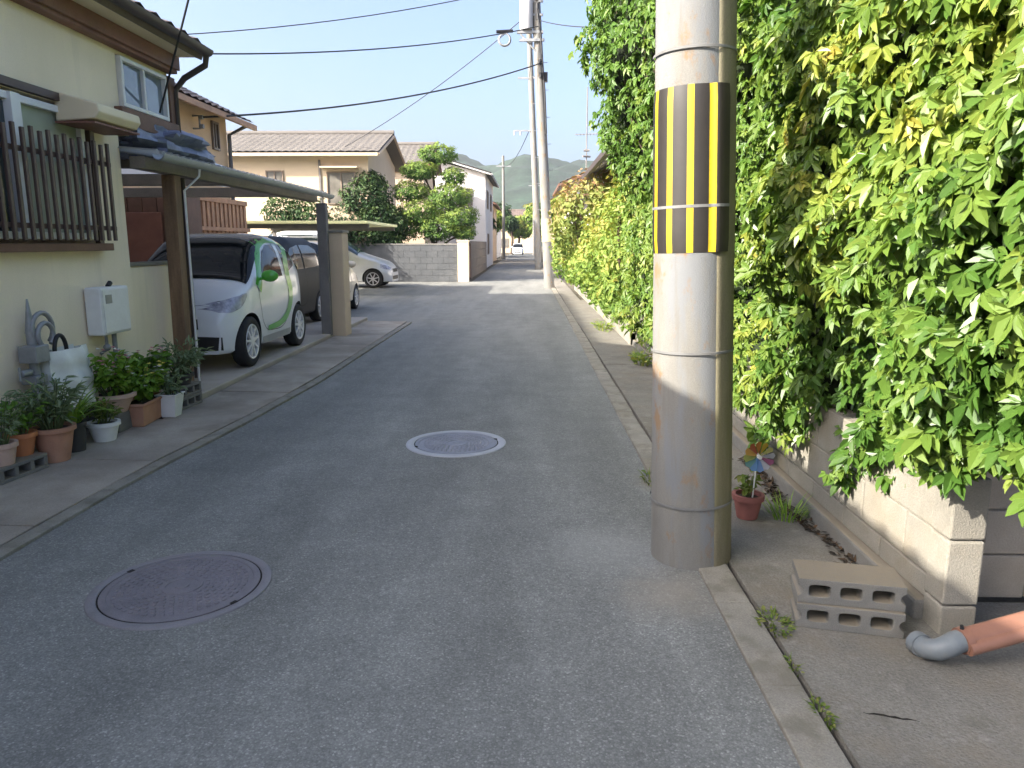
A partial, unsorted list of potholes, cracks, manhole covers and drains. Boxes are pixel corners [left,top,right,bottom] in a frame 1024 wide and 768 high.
manhole cover [84,551,272,631]
manhole cover [406,430,506,458]
crack [863,712,920,722]
